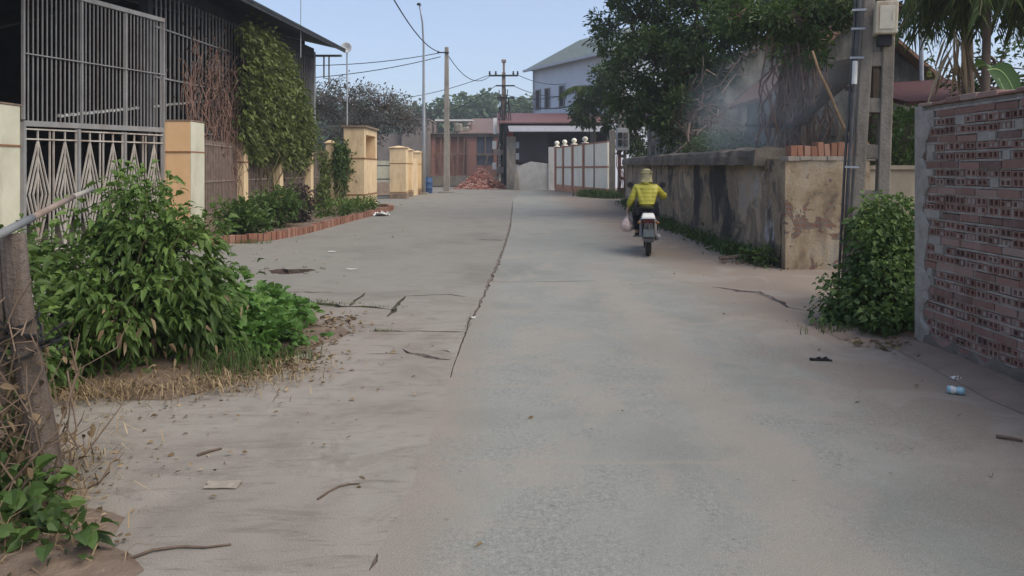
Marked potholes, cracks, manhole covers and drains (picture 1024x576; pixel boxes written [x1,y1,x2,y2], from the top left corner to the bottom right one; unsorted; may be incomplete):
crack [367,202,513,378]
pothole [259,266,326,274]
crack [716,287,800,310]
